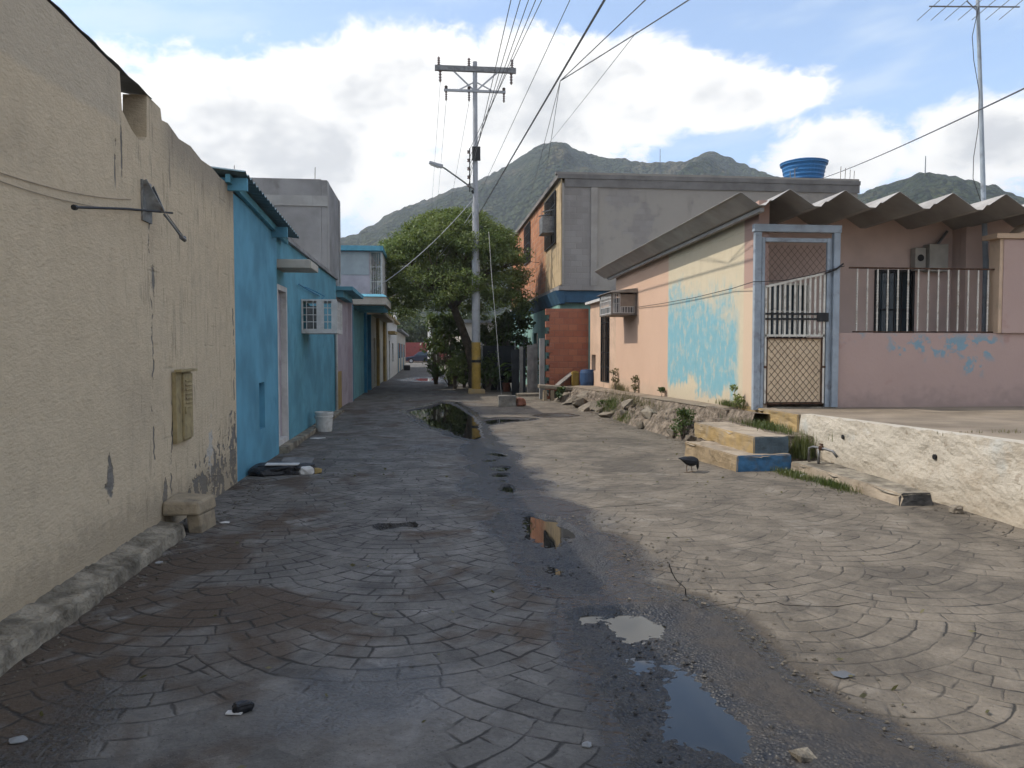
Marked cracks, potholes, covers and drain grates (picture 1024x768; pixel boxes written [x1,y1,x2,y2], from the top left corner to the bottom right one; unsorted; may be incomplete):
crack [669,564,869,609]
pothole [405,401,483,440]
pothole [372,521,418,530]
